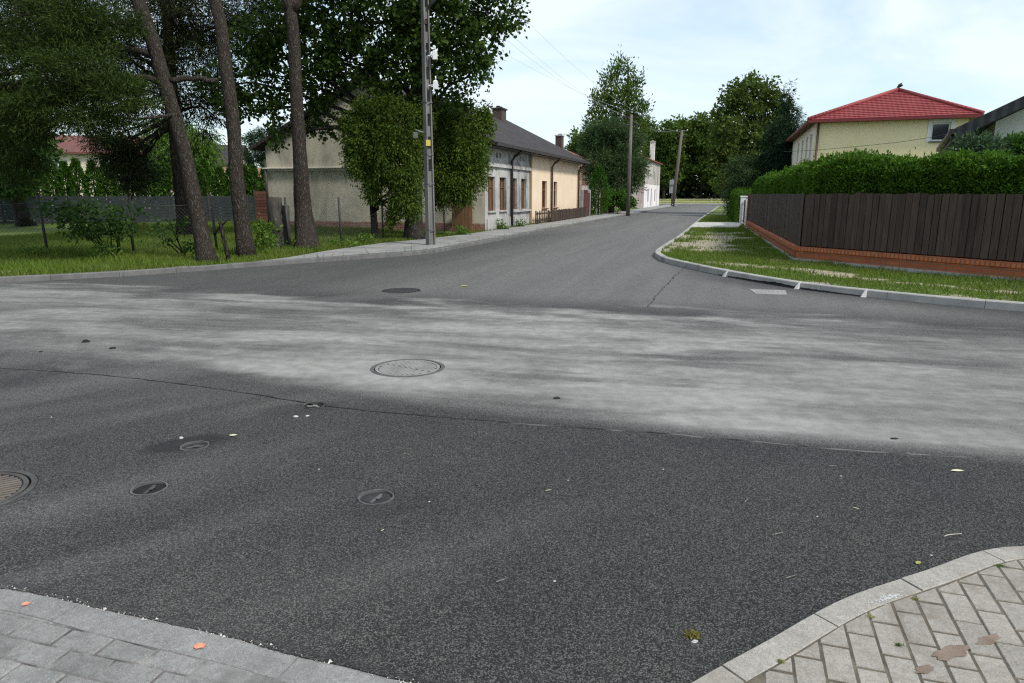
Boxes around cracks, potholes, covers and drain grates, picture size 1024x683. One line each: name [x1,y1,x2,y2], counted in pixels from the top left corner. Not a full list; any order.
manhole cover [357,489,394,505]
manhole cover [370,359,445,377]
manhole cover [179,441,210,451]
manhole cover [129,481,169,496]
